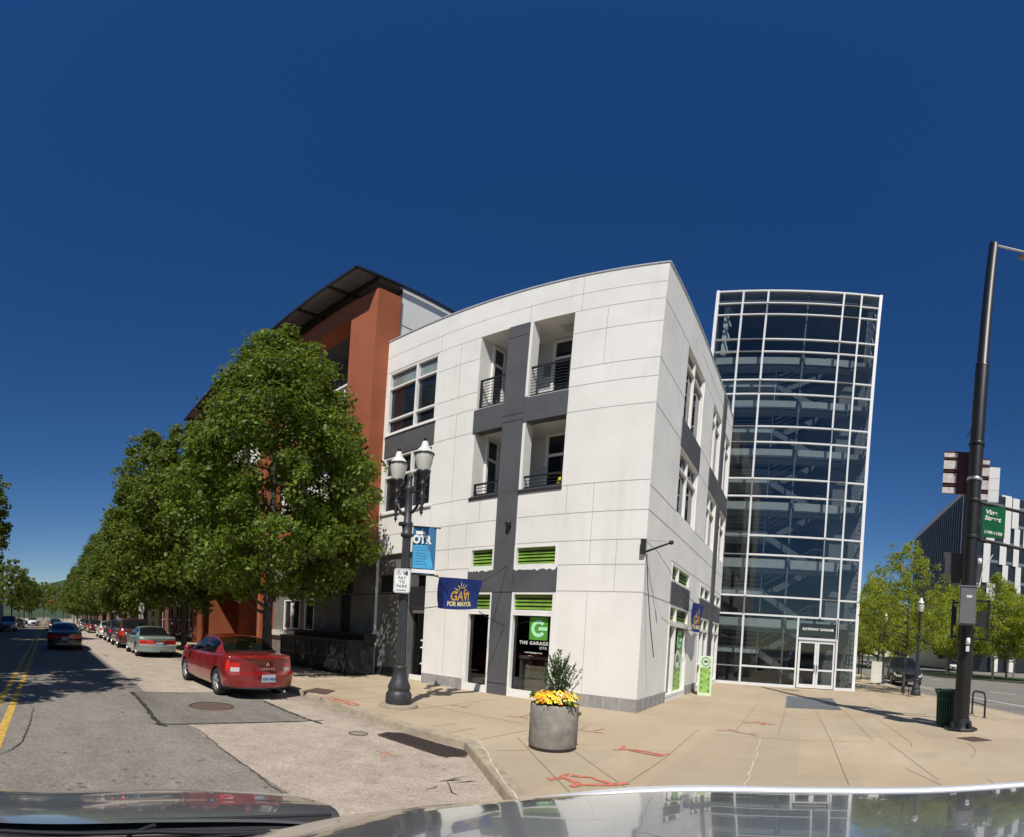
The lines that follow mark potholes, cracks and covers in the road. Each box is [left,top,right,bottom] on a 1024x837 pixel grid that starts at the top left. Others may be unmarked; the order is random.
crack [2,707,34,753]
drain grate [378,732,468,758]
drain grate [785,696,842,710]
manhole cover [188,702,234,710]
crack [743,739,761,785]
crack [429,740,518,799]
